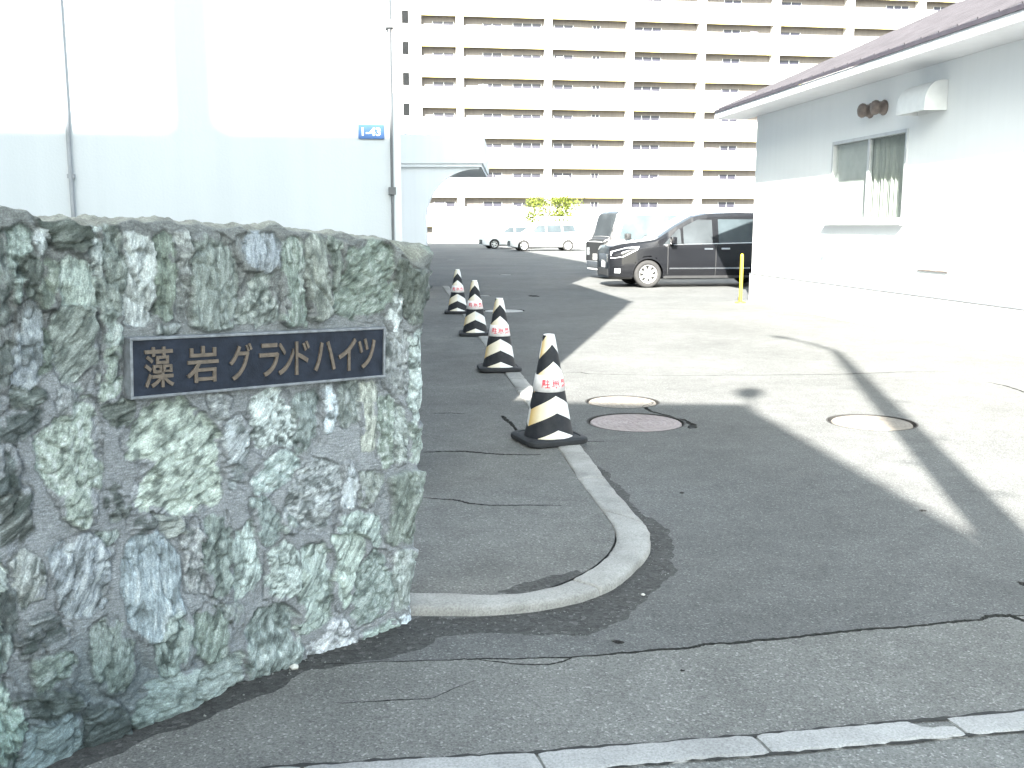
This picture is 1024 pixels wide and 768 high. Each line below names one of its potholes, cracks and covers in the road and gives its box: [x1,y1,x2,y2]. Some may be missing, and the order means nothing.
manhole cover [826,414,919,431]
crack [335,682,470,703]
crack [326,614,1024,665]
manhole cover [586,413,686,432]
crack [430,498,544,506]
manhole cover [585,395,660,409]
